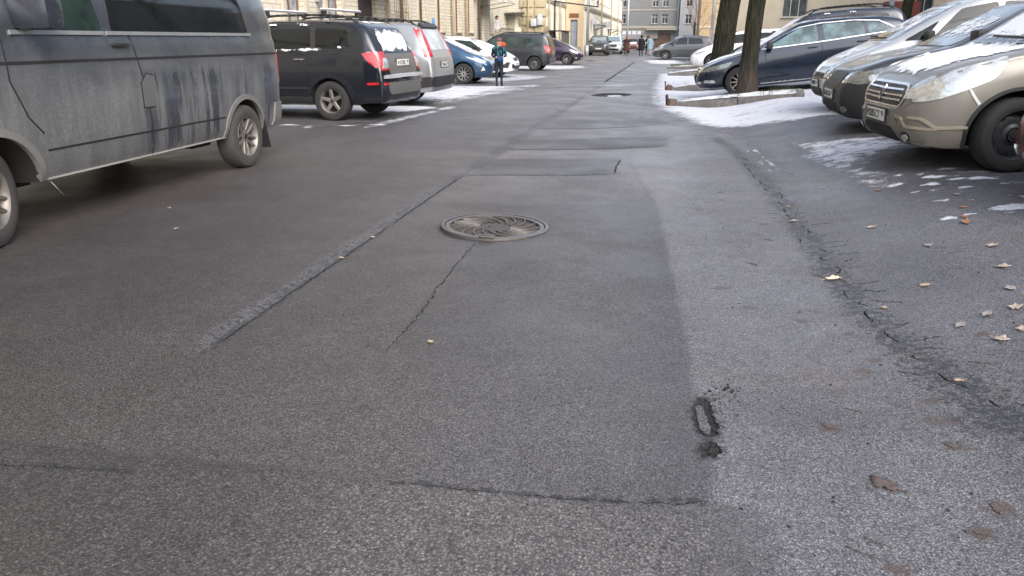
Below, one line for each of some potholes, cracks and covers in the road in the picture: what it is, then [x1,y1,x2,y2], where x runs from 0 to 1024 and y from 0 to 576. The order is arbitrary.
manhole cover [440,213,549,241]
pothole [697,440,722,458]
crack [743,159,1024,408]
pothole [691,398,720,437]
crack [386,242,476,351]
